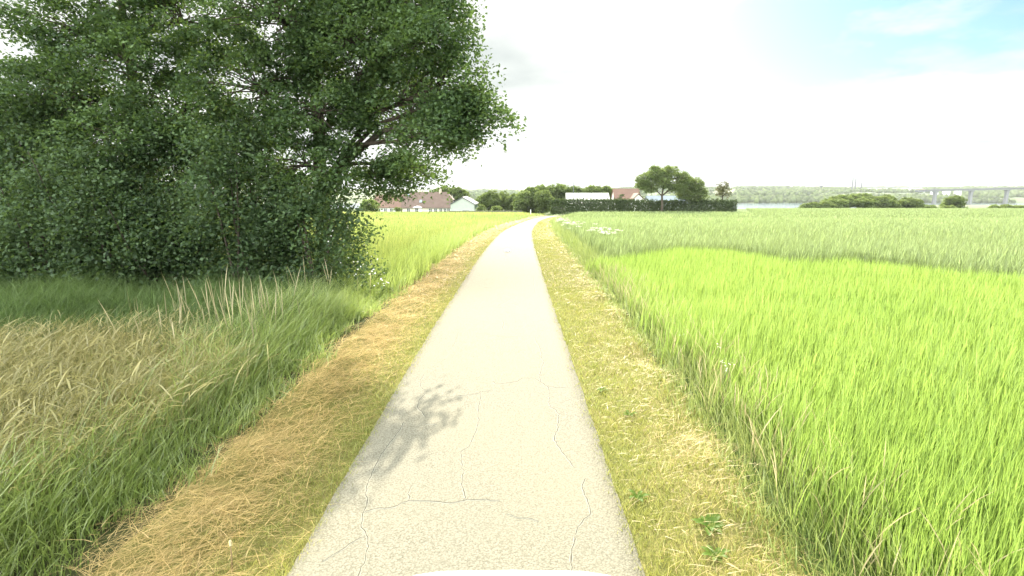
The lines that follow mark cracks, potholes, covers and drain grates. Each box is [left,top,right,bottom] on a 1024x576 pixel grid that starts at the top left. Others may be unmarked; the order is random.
crack [322,337,592,576]
